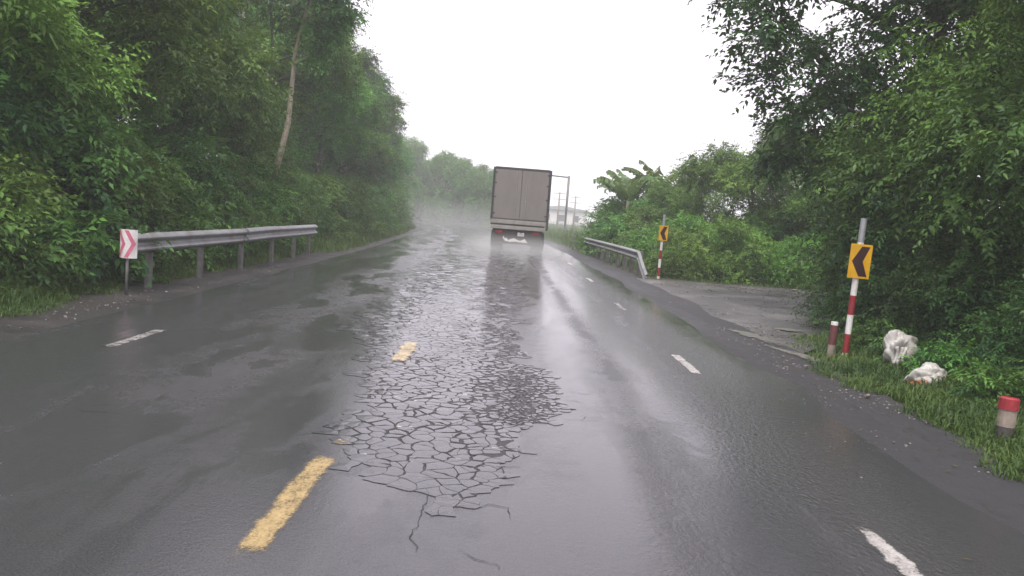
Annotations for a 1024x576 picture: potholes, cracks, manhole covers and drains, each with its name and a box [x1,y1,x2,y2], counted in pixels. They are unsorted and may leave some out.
crack [312,254,598,551]
